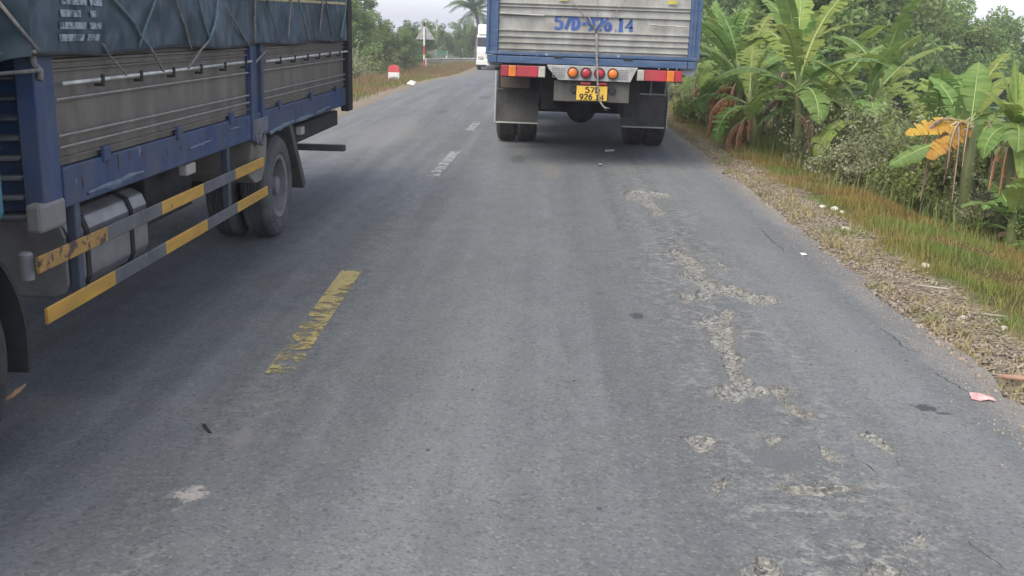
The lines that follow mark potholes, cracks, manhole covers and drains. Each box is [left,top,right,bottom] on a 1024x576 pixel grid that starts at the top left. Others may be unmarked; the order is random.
pothole [668,249,779,306]
pothole [859,564,903,576]
pothole [762,436,789,446]
pothole [771,482,861,497]
pothole [817,446,837,461]
pothole [695,309,814,419]
pothole [623,190,672,216]
pothole [909,532,927,550]
pothole [858,431,897,455]
pothole [736,556,783,576]
pothole [680,436,718,454]
pothole [709,478,728,494]
